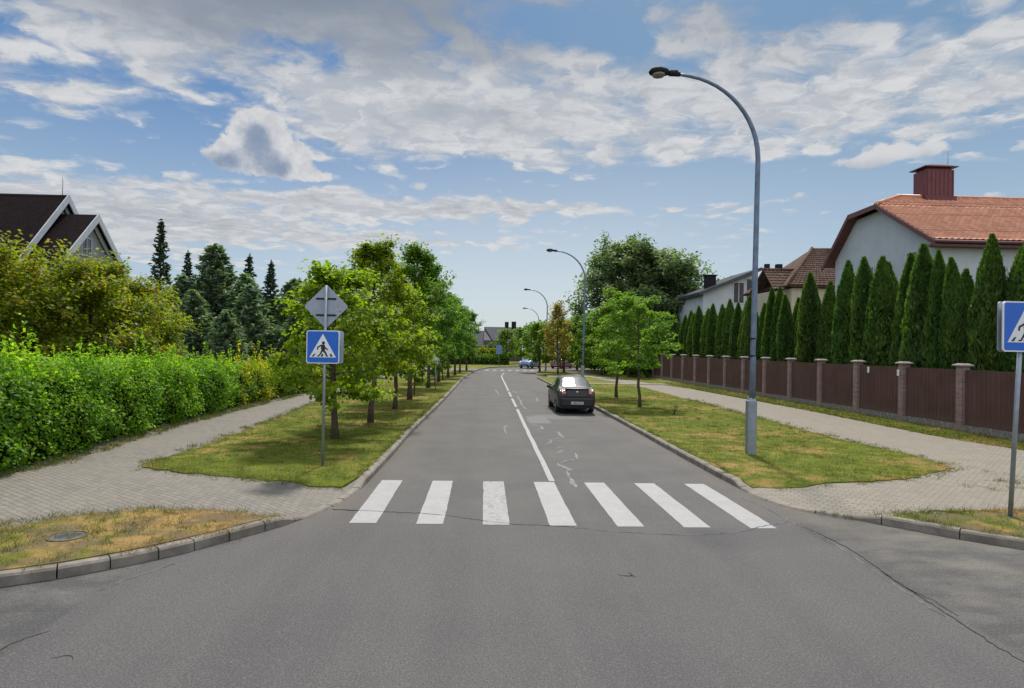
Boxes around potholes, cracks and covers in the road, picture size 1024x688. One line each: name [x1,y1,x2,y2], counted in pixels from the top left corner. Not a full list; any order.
crack [495,389,578,487]
manhole cover [46,531,88,542]
